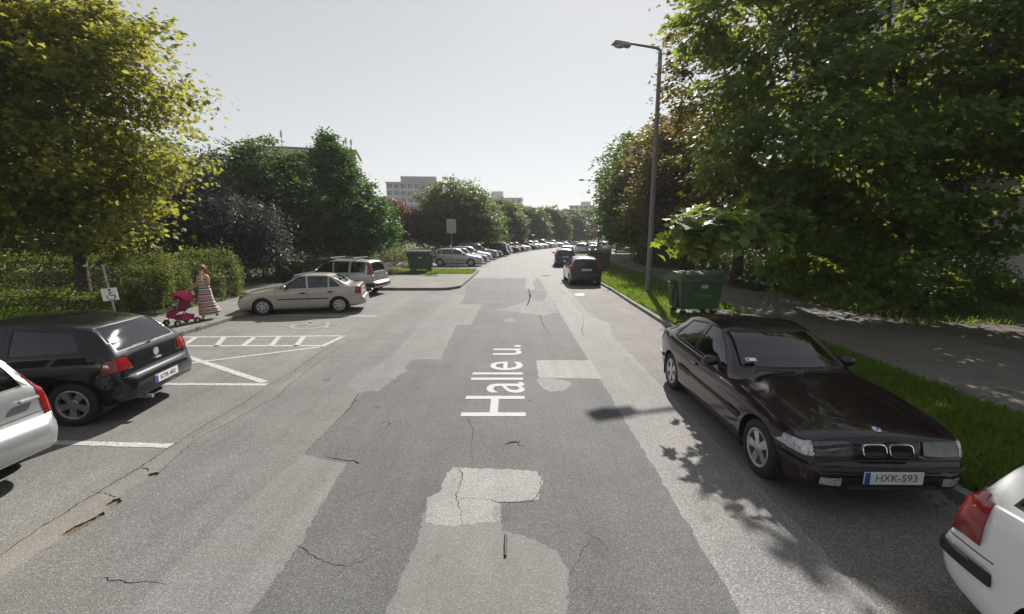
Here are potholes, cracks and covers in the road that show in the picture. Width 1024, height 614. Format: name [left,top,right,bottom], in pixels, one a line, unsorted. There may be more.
crack [1,345,342,555]
crack [455,417,542,526]
pothole [62,512,105,536]
